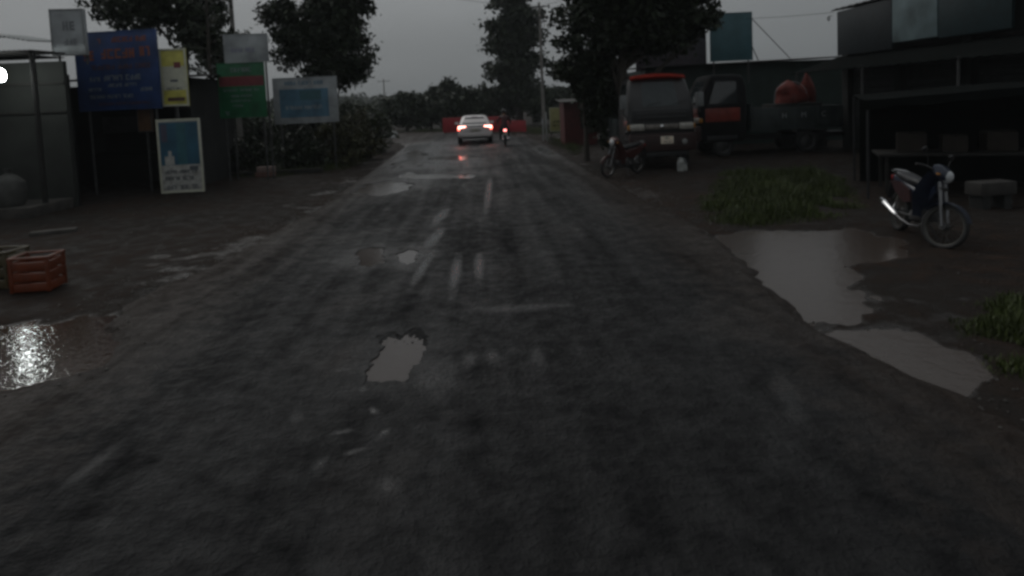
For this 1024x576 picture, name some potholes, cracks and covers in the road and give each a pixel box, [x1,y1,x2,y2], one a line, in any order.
pothole [355,247,387,267]
pothole [364,327,429,384]
pothole [349,181,416,196]
pothole [395,249,419,265]
